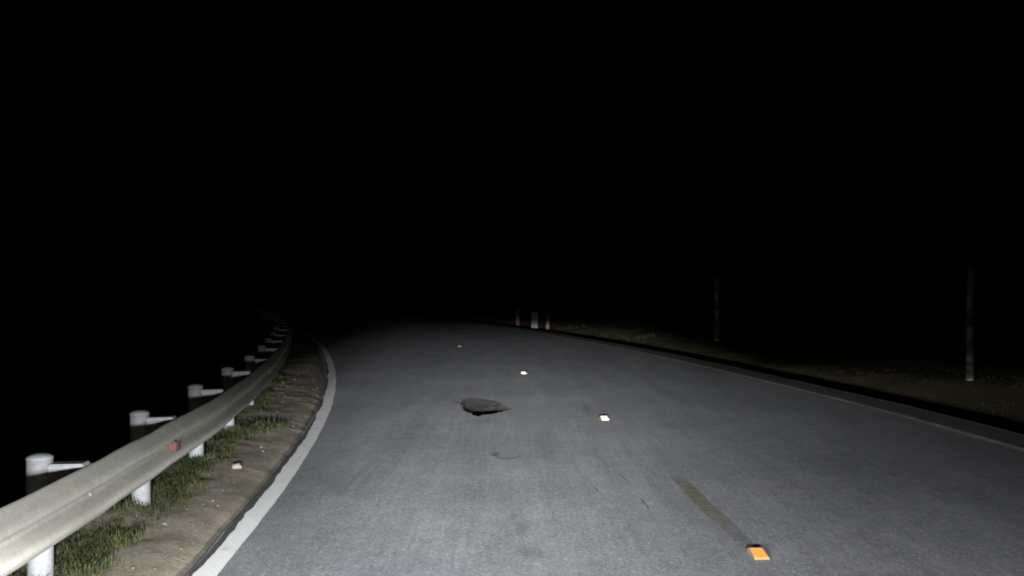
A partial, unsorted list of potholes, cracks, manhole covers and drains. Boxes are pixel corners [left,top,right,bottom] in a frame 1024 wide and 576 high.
pothole [455,398,512,416]
